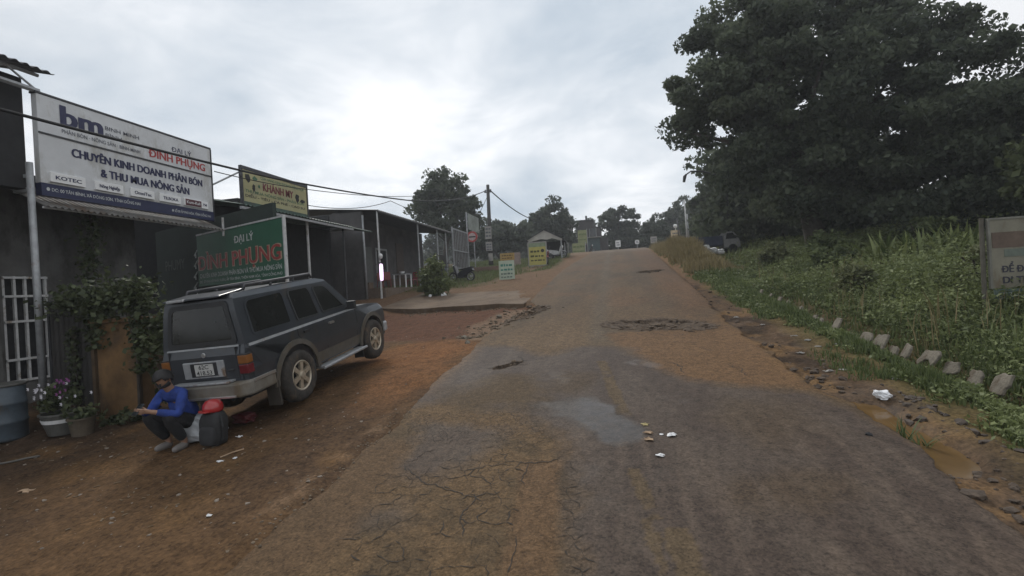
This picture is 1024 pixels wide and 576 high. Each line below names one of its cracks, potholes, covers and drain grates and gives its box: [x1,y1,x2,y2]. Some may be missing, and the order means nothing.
pothole [492,360,523,370]
crack [337,411,595,576]
pothole [600,318,721,332]
